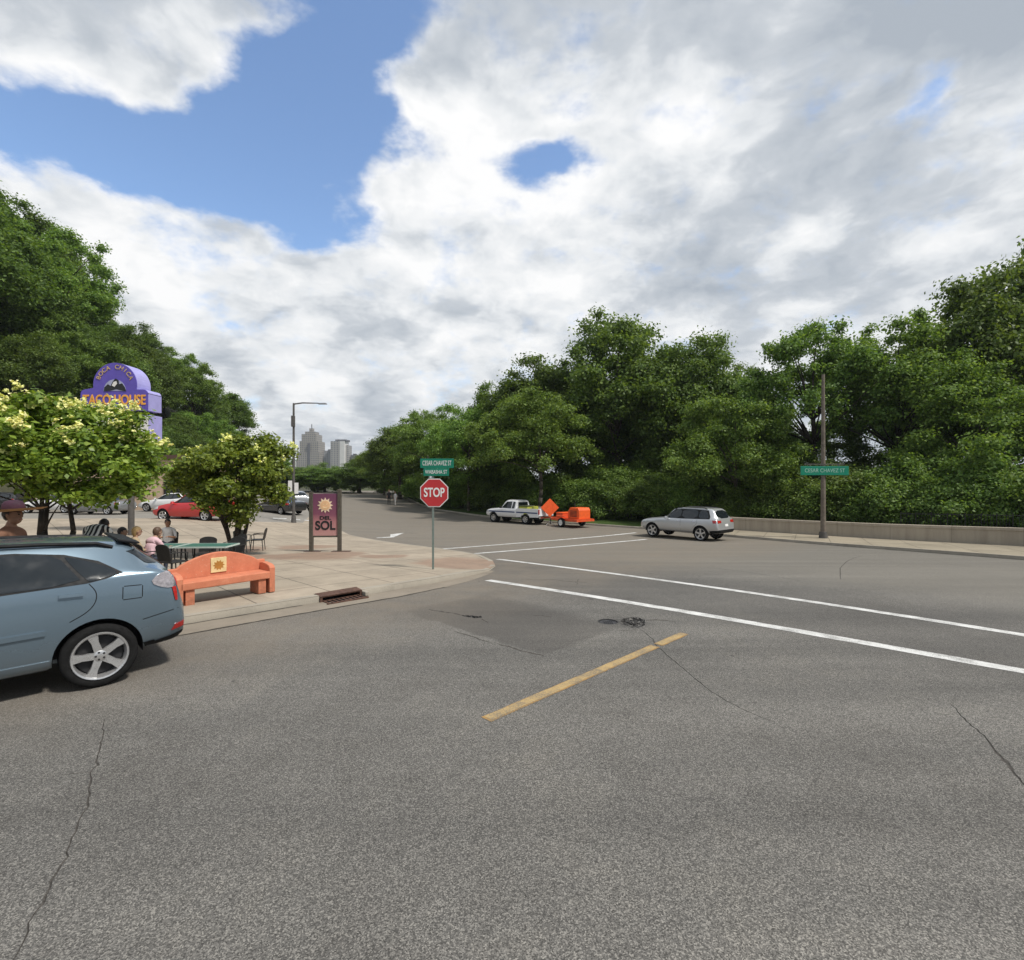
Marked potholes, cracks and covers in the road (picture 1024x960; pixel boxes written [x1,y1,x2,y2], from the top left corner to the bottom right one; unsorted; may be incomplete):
crack [13,720,105,960]
crack [953,706,1024,785]
crack [619,619,773,722]
pothole [621,617,645,628]
drain grate [315,587,369,605]
